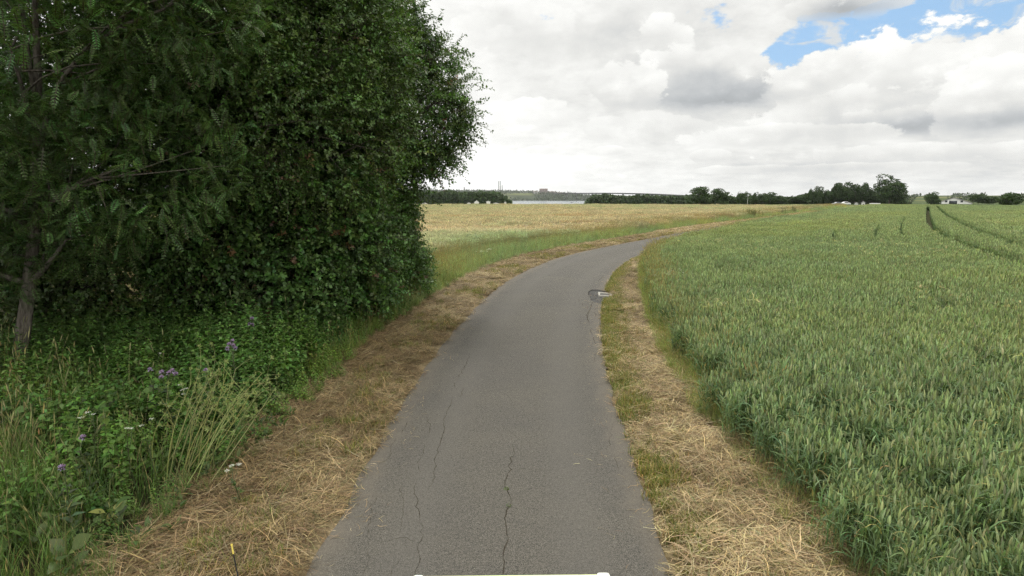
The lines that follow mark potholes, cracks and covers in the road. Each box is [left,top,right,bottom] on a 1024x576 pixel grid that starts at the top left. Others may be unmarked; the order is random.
crack [383,354,470,574]
crack [503,445,531,574]
